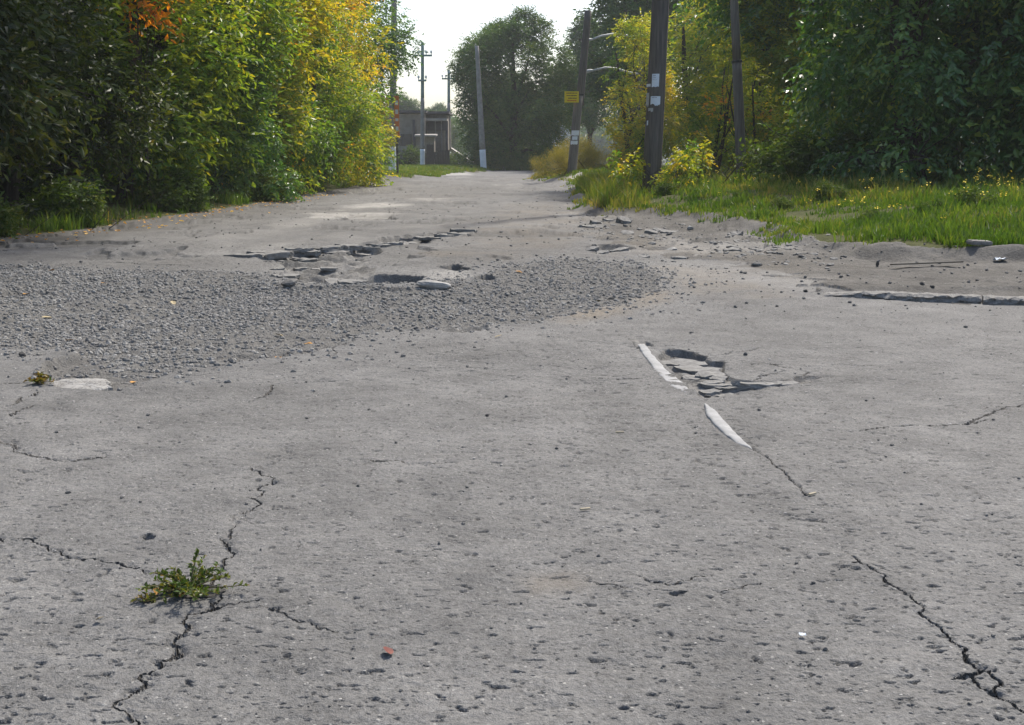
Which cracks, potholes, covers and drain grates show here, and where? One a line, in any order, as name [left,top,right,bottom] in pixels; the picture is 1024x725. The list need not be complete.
pothole [643,341,824,398]
crack [752,448,804,494]
crack [111,468,339,725]
pothole [256,246,383,284]
crack [0,441,103,462]
crack [0,538,144,573]
crack [851,555,1024,714]
crack [865,404,1023,431]
pothole [380,231,460,243]
